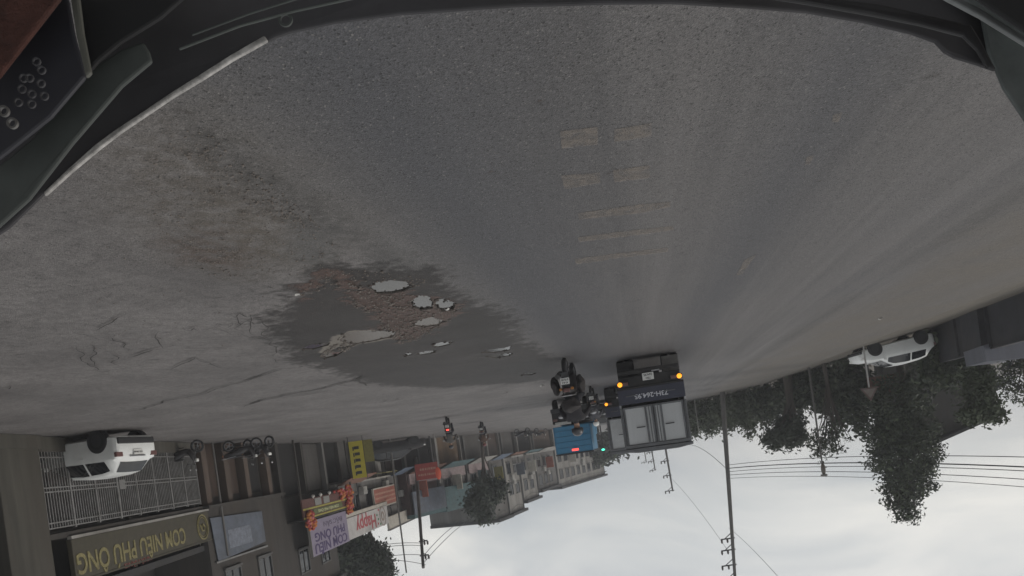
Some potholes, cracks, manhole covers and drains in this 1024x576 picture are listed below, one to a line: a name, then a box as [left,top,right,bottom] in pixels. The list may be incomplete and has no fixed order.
pothole [408,295,436,311]
crack [69,313,299,412]
pothole [433,298,458,312]
pothole [338,330,397,345]
pothole [368,279,415,294]
pothole [411,315,446,329]
crack [245,376,368,406]
